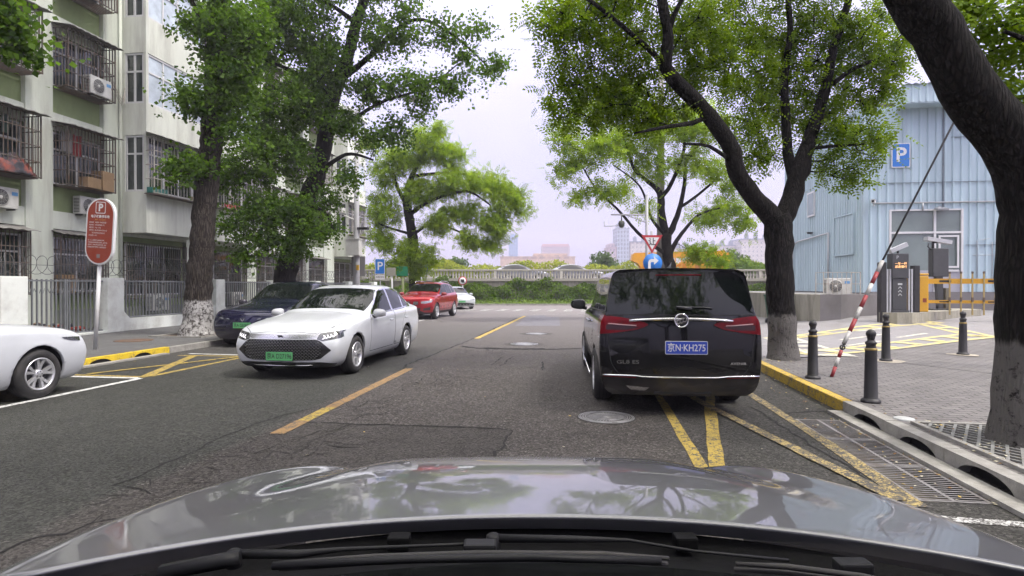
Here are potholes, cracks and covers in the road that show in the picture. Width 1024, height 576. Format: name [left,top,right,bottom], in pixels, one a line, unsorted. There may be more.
drain grate [796,419,876,440]
manhole cover [577,411,636,424]
drain grate [827,438,925,467]
crack [750,406,866,479]
drain grate [866,464,994,504]
